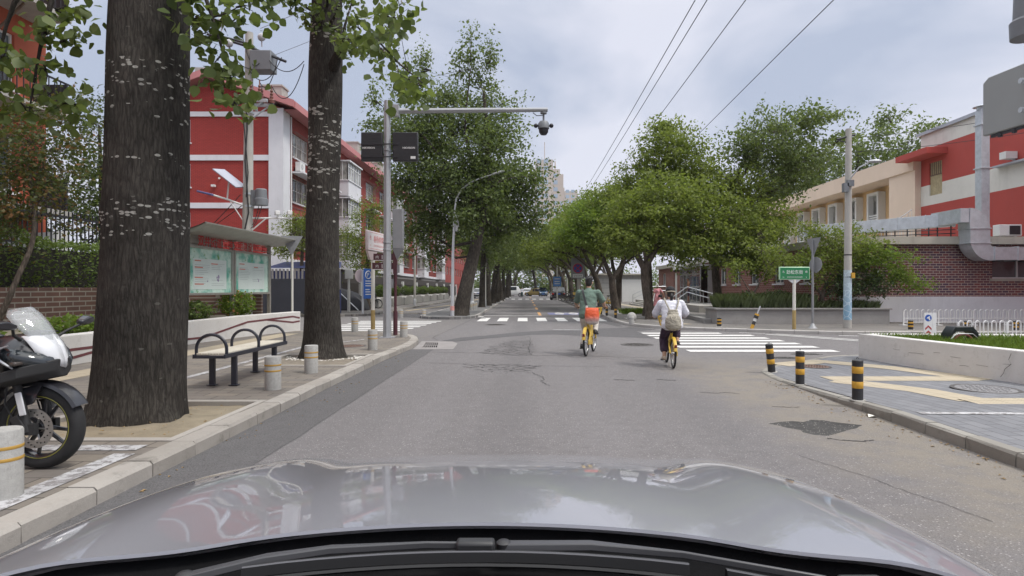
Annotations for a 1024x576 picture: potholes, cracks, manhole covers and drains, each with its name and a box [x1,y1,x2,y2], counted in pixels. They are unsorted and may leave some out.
crack [458,323,635,386]
manhole cover [950,384,1024,394]
crack [802,456,993,522]
